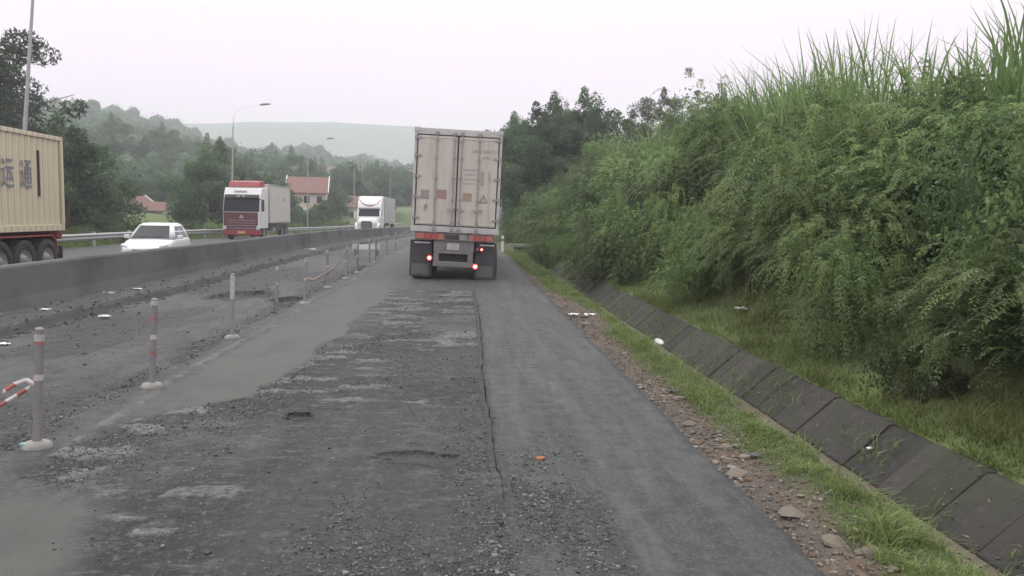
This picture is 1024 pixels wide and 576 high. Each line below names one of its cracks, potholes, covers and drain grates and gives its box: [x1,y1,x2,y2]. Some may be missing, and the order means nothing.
pothole [282,411,319,420]
pothole [200,289,280,301]
pothole [363,448,469,467]
crack [471,290,515,516]
pothole [264,294,315,305]
